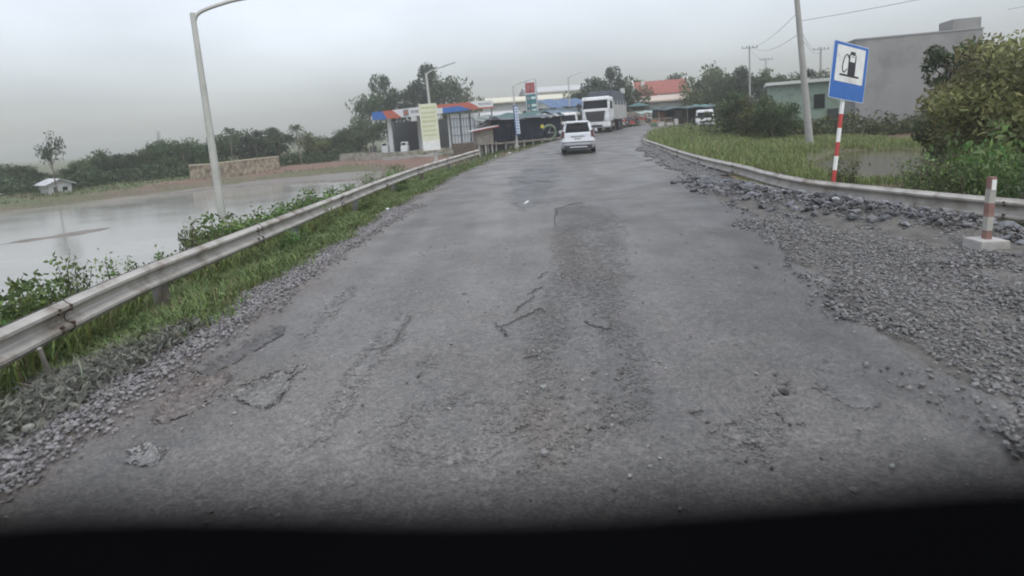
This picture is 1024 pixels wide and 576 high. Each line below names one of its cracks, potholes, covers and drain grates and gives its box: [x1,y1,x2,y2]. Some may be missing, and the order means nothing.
pothole [122,440,166,466]
crack [495,271,548,336]
pothole [152,372,235,423]
pothole [186,325,285,378]
pothole [225,363,307,408]
